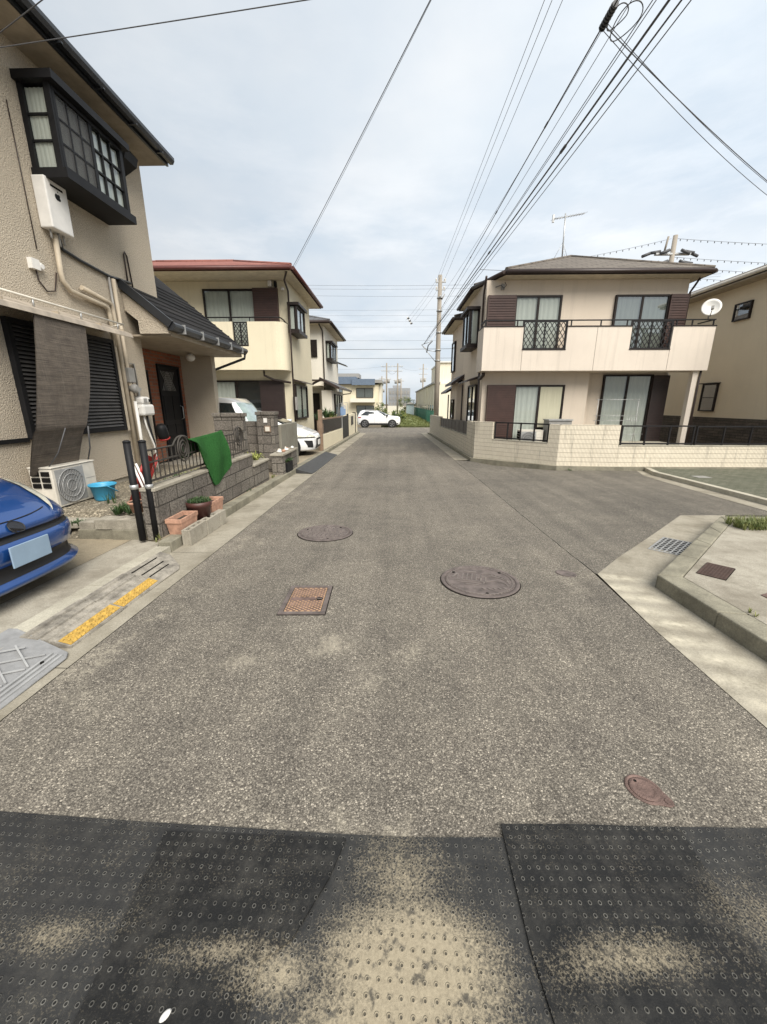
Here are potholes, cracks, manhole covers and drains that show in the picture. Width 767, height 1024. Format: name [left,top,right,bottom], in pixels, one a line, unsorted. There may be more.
manhole cover [696,562,736,581]
utility cover [624,774,675,808]
manhole cover [440,566,521,599]
drain grate [648,537,692,556]
manhole cover [277,585,333,615]
manhole cover [297,525,353,542]
